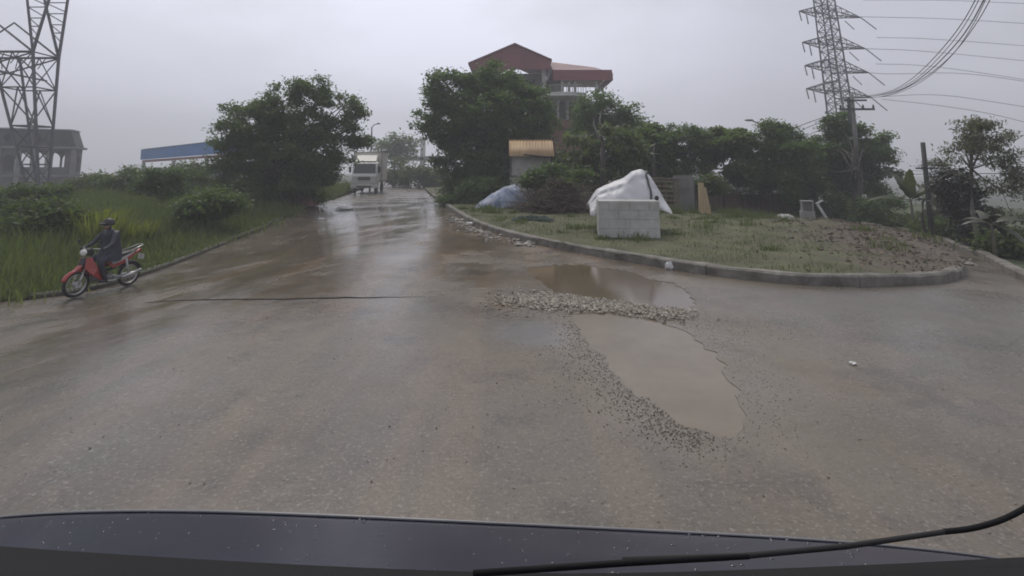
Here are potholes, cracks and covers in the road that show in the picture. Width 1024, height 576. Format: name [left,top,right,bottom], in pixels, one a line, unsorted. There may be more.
pothole [527,264,697,309]
pothole [571,313,747,437]
